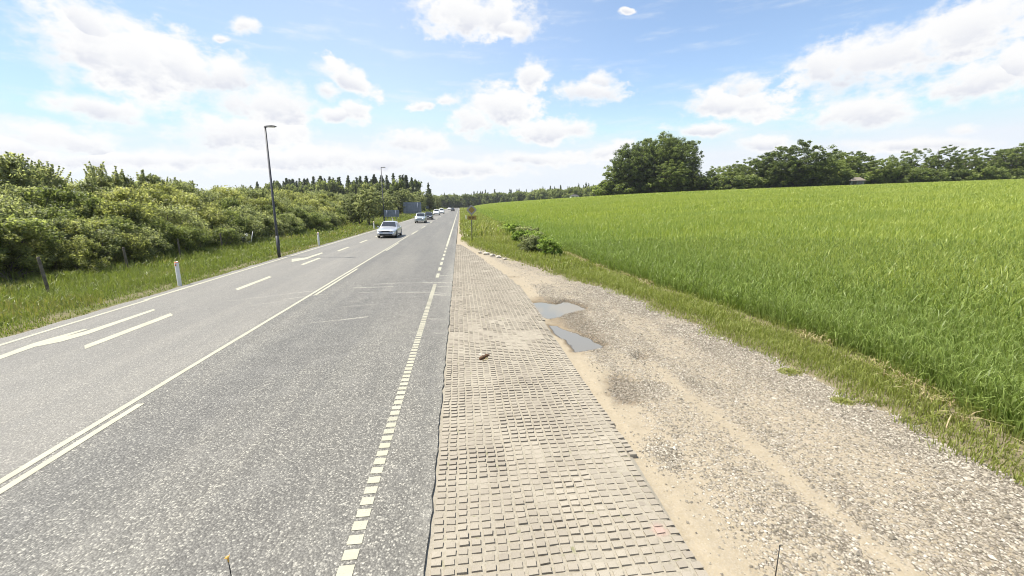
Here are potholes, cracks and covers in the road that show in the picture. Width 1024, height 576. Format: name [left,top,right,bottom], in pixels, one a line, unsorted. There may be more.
pothole [532,300,588,319]
pothole [548,324,609,352]
